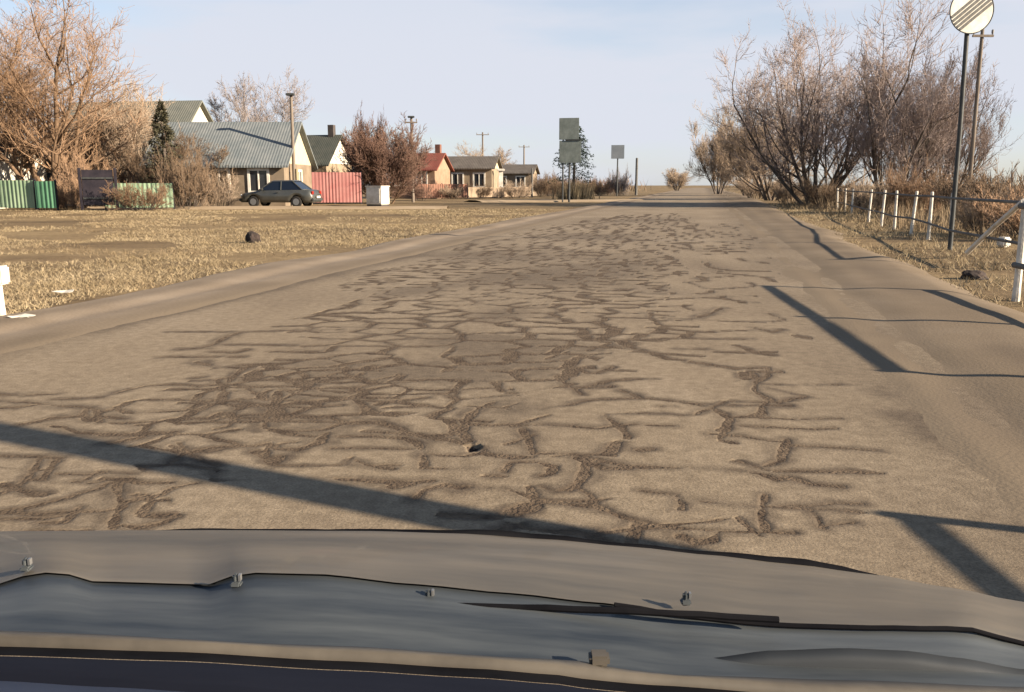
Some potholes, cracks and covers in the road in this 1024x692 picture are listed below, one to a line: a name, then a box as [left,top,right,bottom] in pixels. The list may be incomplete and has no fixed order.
crack [0,213,885,546]
